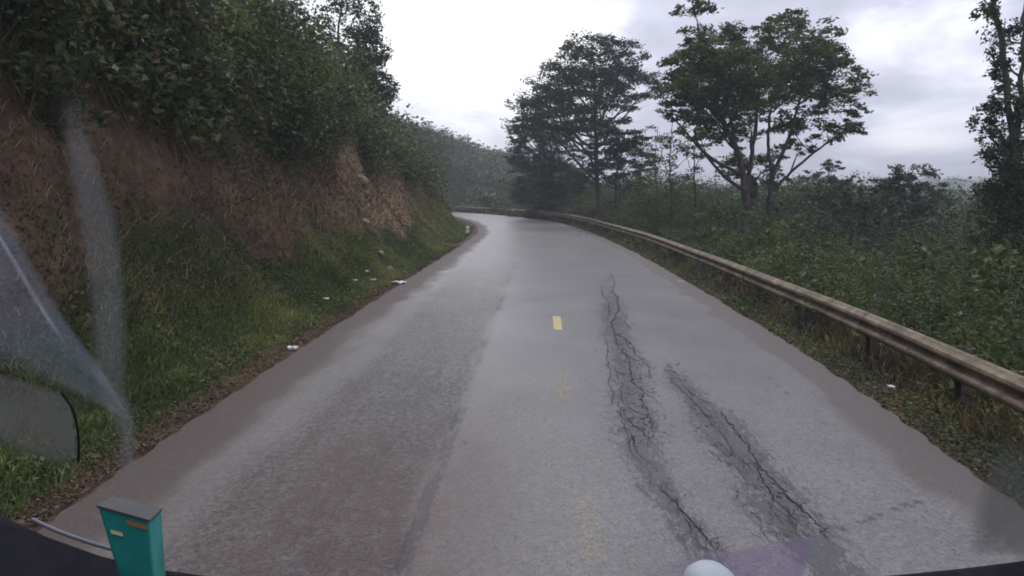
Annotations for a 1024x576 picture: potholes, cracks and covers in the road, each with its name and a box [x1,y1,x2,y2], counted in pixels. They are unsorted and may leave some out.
crack [653,362,847,545]
crack [600,274,673,467]
crack [635,462,735,555]
